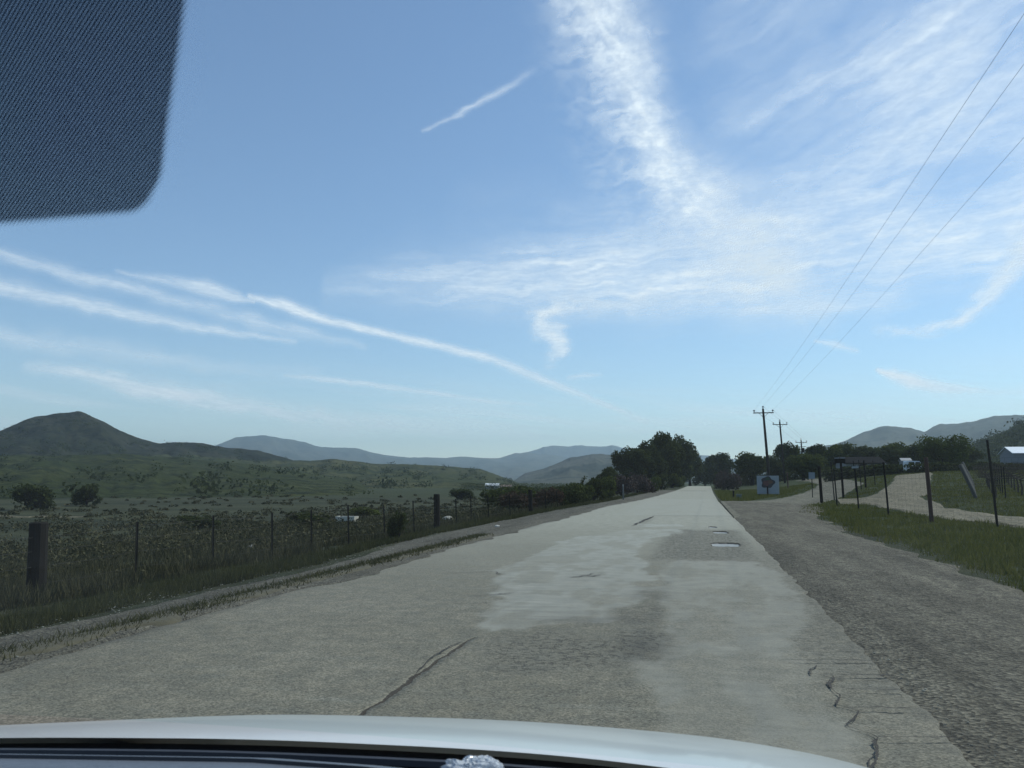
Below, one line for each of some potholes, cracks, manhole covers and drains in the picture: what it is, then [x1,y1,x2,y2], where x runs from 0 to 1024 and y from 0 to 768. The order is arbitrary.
crack [783,602,956,768]
